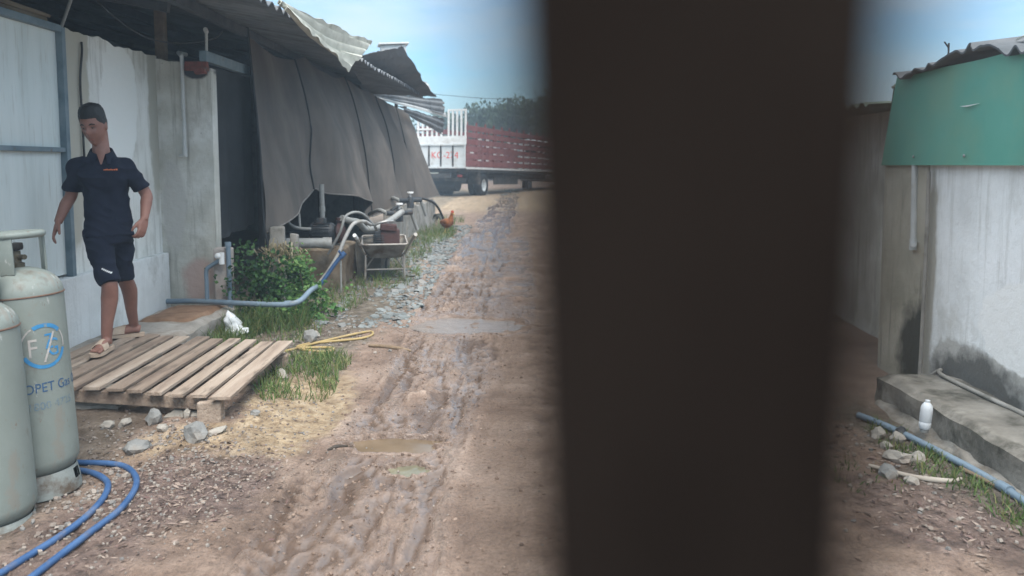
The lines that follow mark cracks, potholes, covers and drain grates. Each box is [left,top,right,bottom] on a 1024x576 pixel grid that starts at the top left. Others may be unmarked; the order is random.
pothole [330,431,458,457]
pothole [380,459,435,479]
